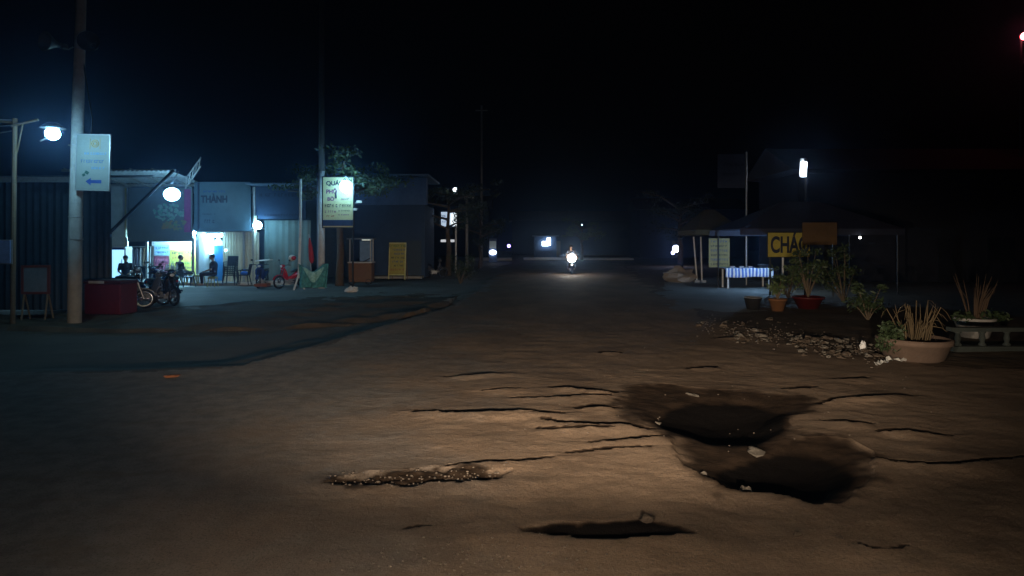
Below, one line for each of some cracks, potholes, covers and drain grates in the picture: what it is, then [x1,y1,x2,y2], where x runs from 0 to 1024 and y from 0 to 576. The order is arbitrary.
crack [412,372,666,466]
pothole [619,383,876,504]
crack [780,376,869,389]
crack [873,454,1024,464]
pothole [522,519,697,539]
crack [819,419,952,436]
pothole [327,466,513,487]
